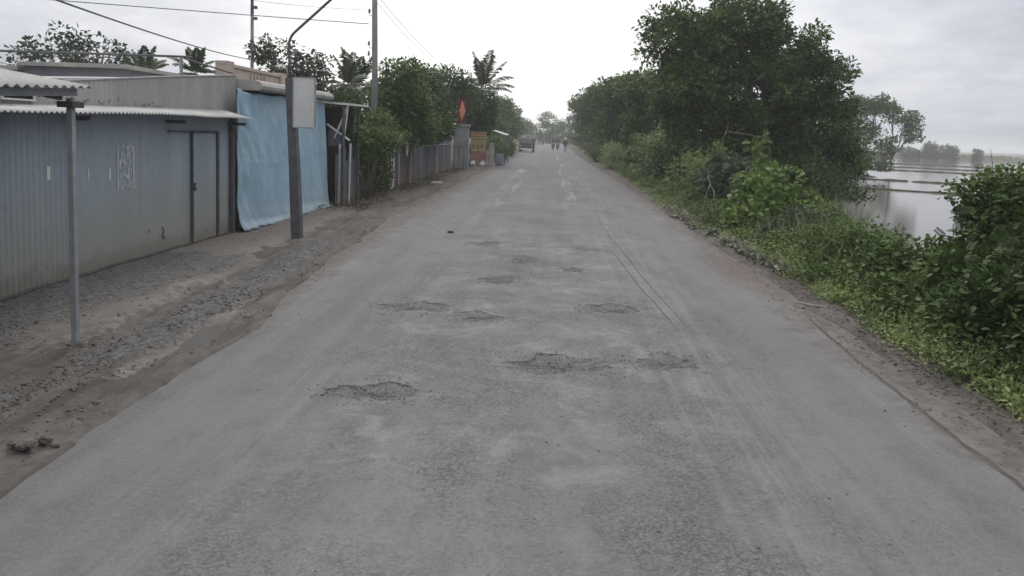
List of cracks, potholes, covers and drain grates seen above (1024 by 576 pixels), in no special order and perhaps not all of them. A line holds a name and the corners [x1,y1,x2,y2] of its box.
pothole [612,350,723,376]
pothole [481,348,644,380]
pothole [465,240,509,248]
pothole [305,376,445,408]
pothole [444,308,518,324]
pothole [467,273,530,286]
pothole [365,296,466,318]
pothole [574,299,647,318]
pothole [501,253,546,266]
